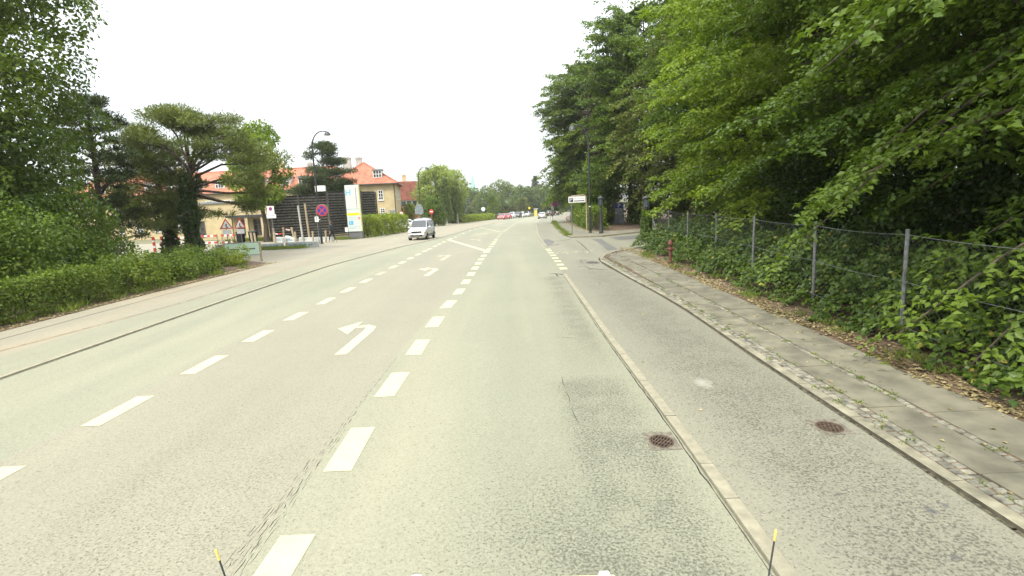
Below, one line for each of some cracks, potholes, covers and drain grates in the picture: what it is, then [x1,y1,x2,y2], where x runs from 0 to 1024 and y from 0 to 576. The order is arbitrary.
drain grate [805,419,856,435]
drain grate [642,432,682,451]
